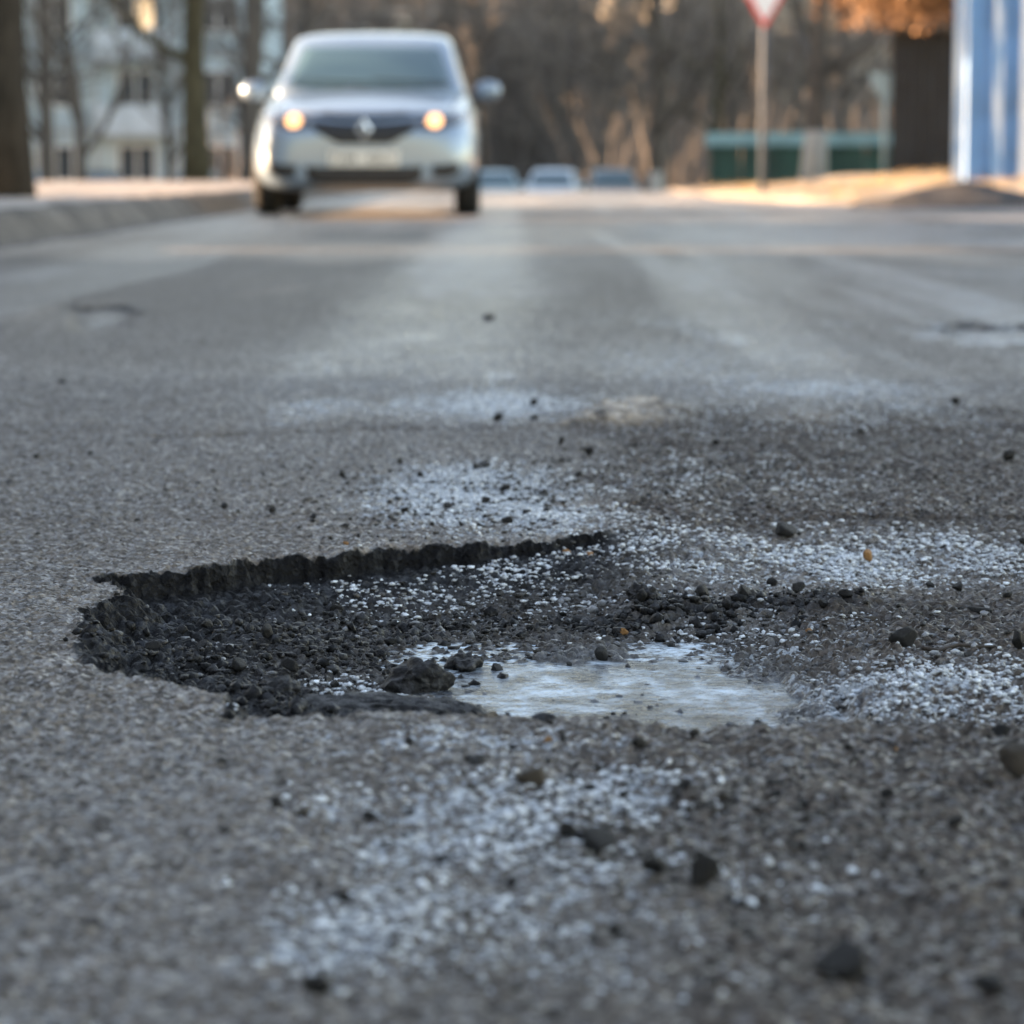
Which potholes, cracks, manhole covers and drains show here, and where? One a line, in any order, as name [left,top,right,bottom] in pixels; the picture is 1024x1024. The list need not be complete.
pothole [917,321,1024,347]
pothole [53,304,147,332]
pothole [70,512,1024,740]
